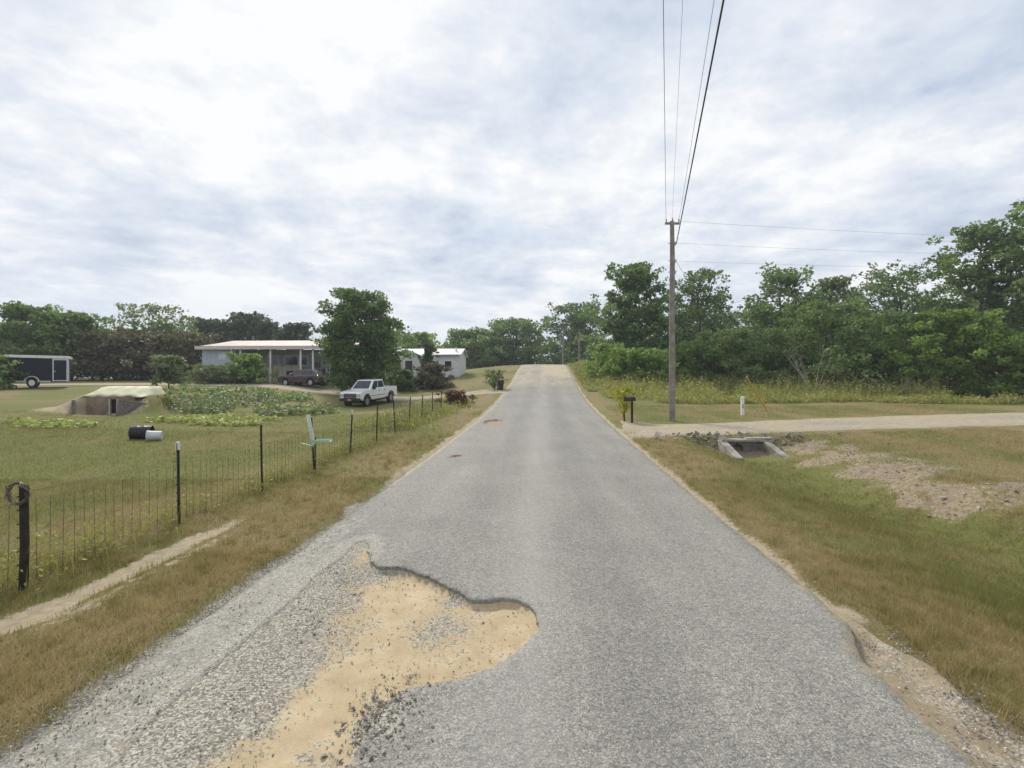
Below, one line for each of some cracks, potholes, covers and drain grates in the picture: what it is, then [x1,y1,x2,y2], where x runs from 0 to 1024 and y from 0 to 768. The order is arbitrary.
pothole [112,541,538,768]
